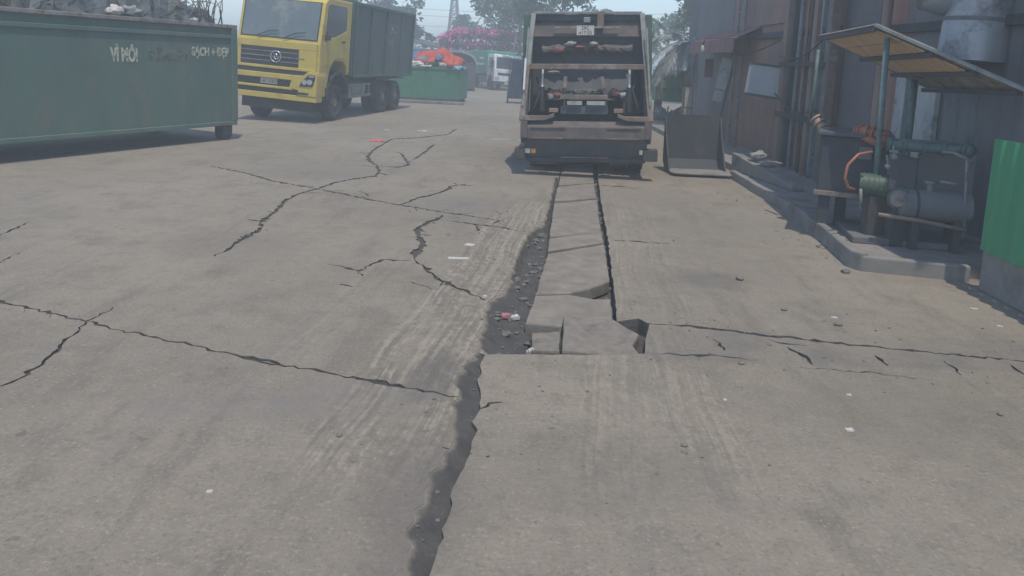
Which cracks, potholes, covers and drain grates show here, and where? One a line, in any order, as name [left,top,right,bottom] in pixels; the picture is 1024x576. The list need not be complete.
pothole [478,178,558,354]
crack [0,300,459,397]
crack [212,129,525,300]
